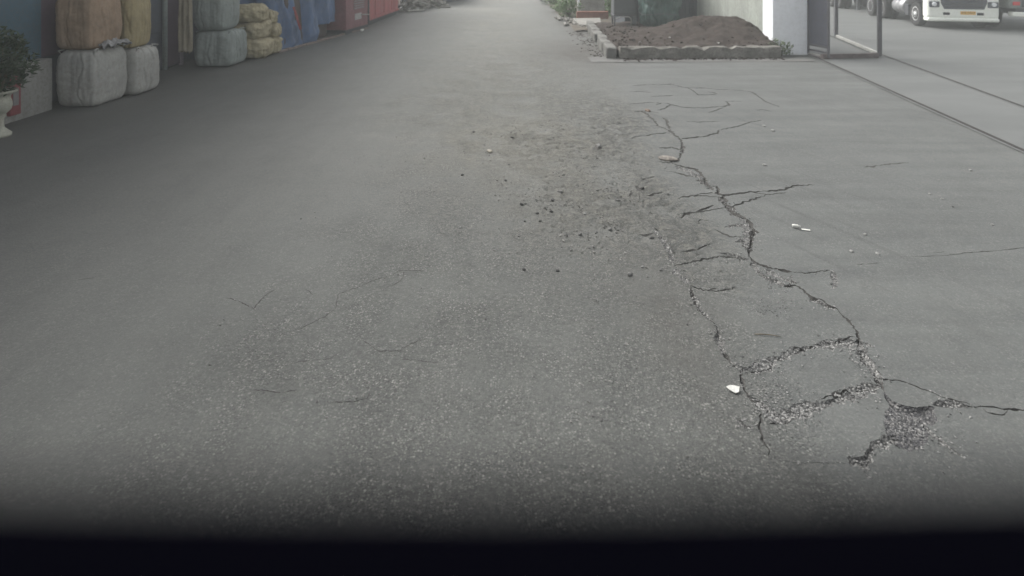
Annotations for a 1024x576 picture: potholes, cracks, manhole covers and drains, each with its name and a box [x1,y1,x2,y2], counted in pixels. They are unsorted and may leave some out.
crack [299,270,425,329]
crack [287,340,439,365]
crack [628,84,1024,479]
pothole [884,392,938,426]
